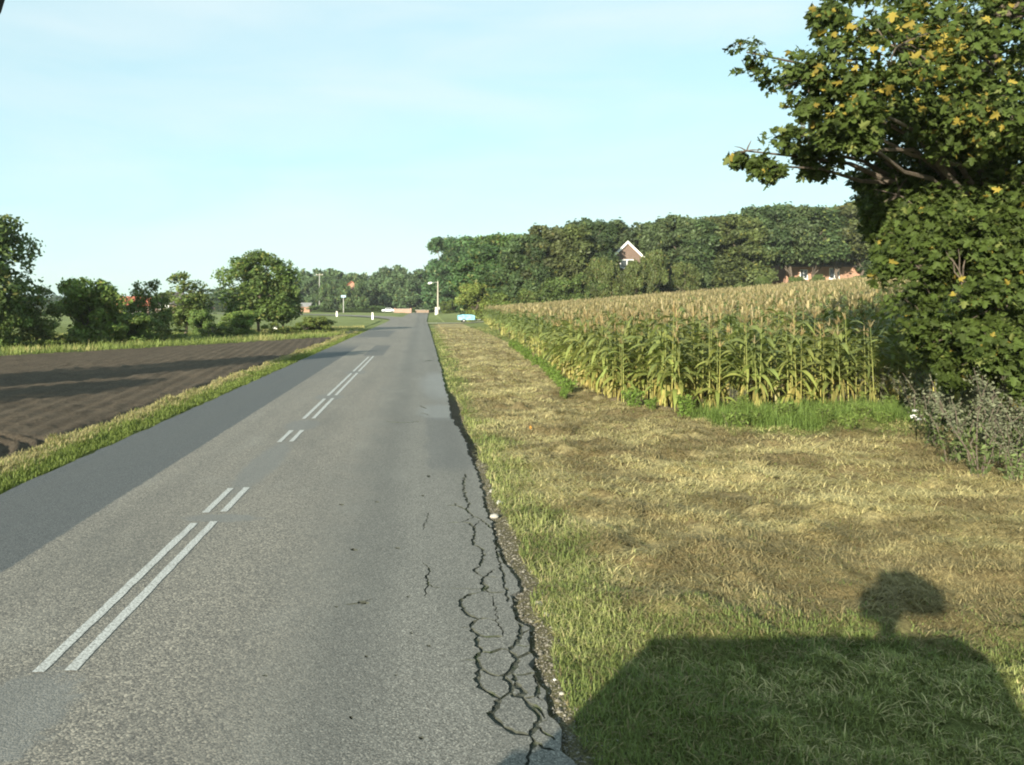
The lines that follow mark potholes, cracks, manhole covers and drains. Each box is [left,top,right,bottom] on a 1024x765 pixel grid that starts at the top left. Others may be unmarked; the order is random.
crack [423,474,556,765]
